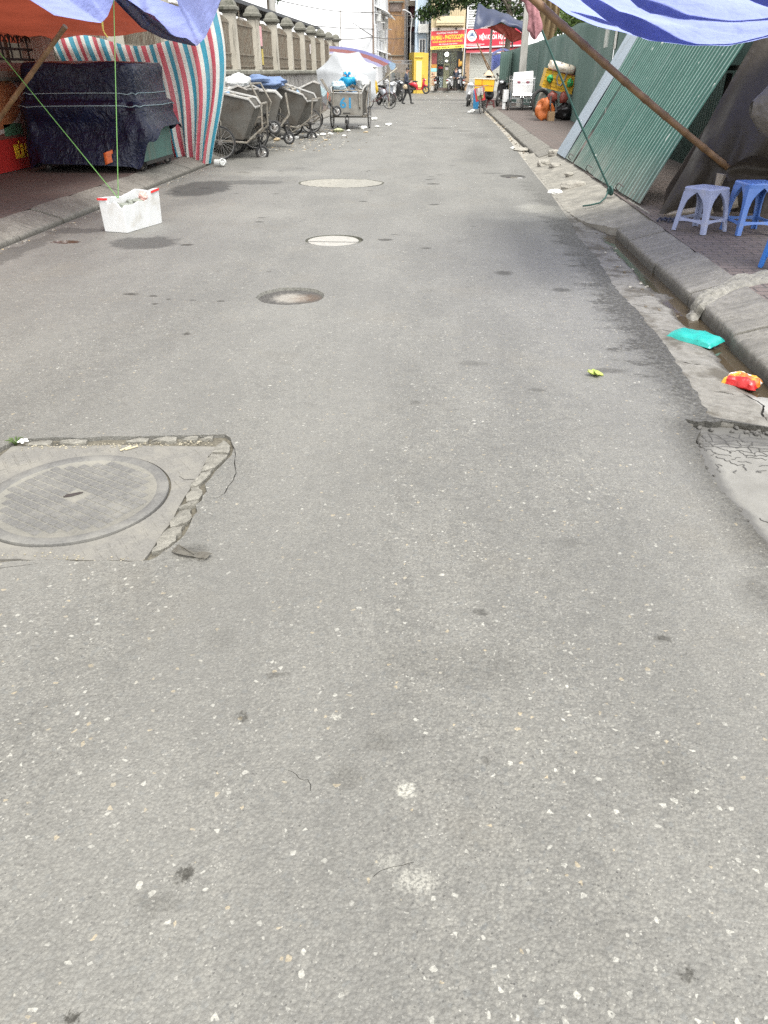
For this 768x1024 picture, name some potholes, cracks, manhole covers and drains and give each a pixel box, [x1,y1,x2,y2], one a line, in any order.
crack [696,392,768,523]
manhole cover [256,288,324,305]
manhole cover [305,235,363,246]
manhole cover [0,436,233,562]
manhole cover [298,179,384,188]
